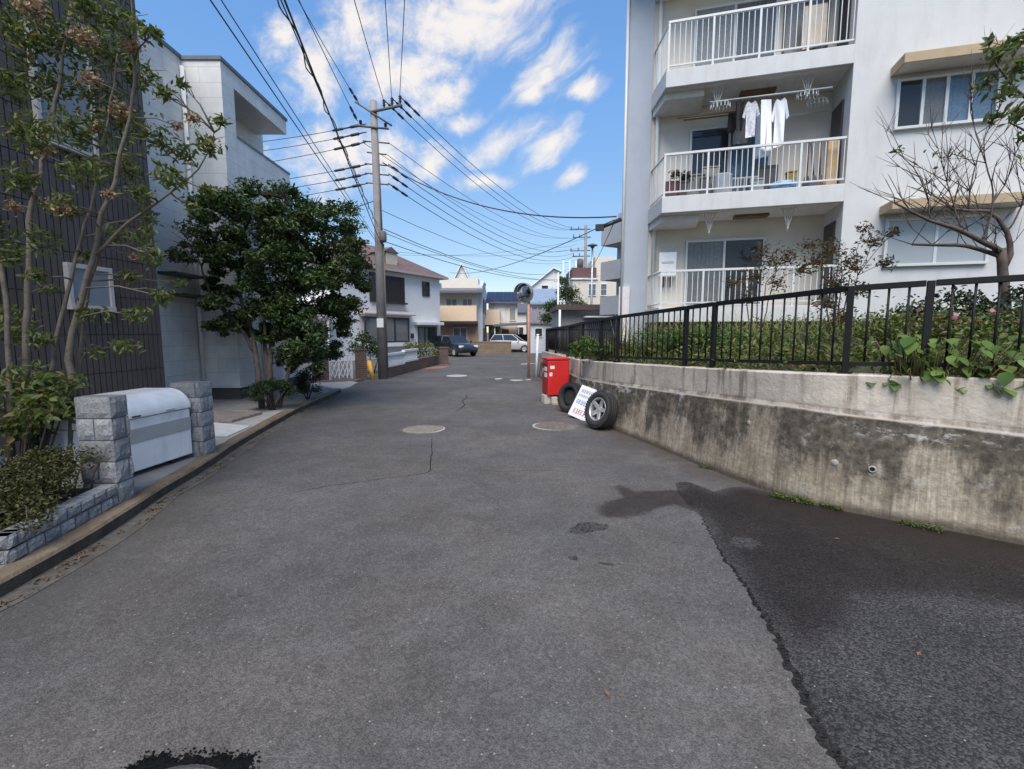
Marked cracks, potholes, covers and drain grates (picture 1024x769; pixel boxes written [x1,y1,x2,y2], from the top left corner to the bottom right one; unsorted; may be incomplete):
manhole cover [532,422,579,431]
crack [263,437,433,500]
manhole cover [399,425,446,434]
